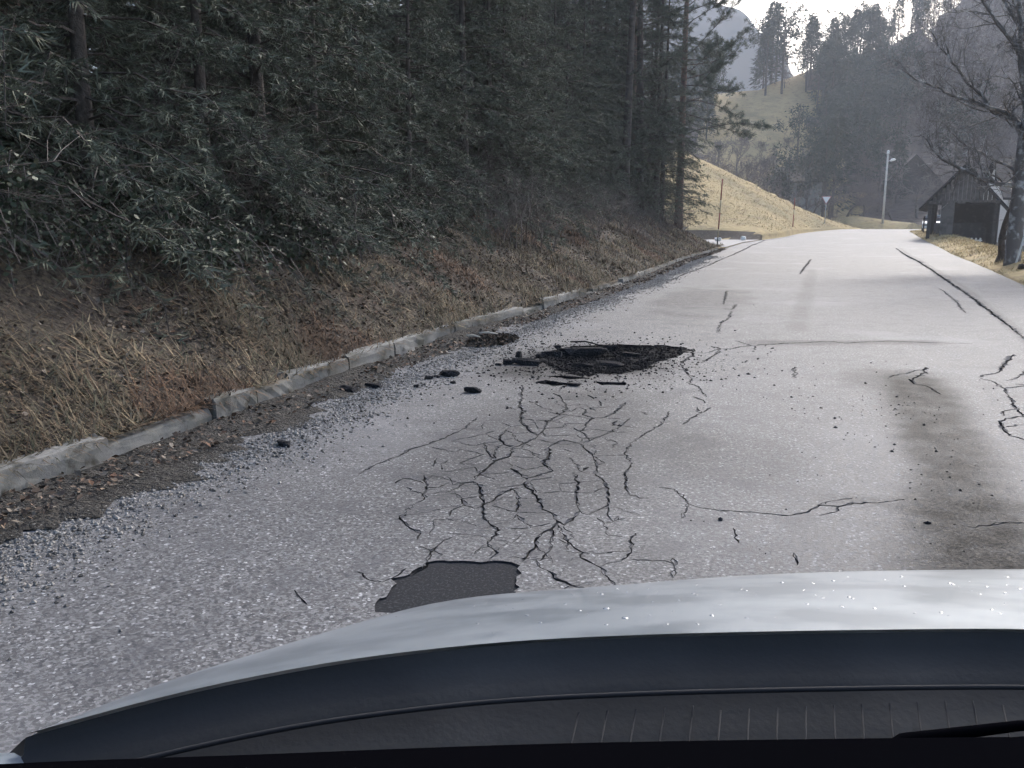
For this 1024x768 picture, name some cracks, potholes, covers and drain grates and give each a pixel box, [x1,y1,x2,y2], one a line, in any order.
crack [659,487,904,543]
crack [679,291,969,424]
pothole [536,343,693,386]
crack [980,354,1024,440]
crack [294,381,678,604]
